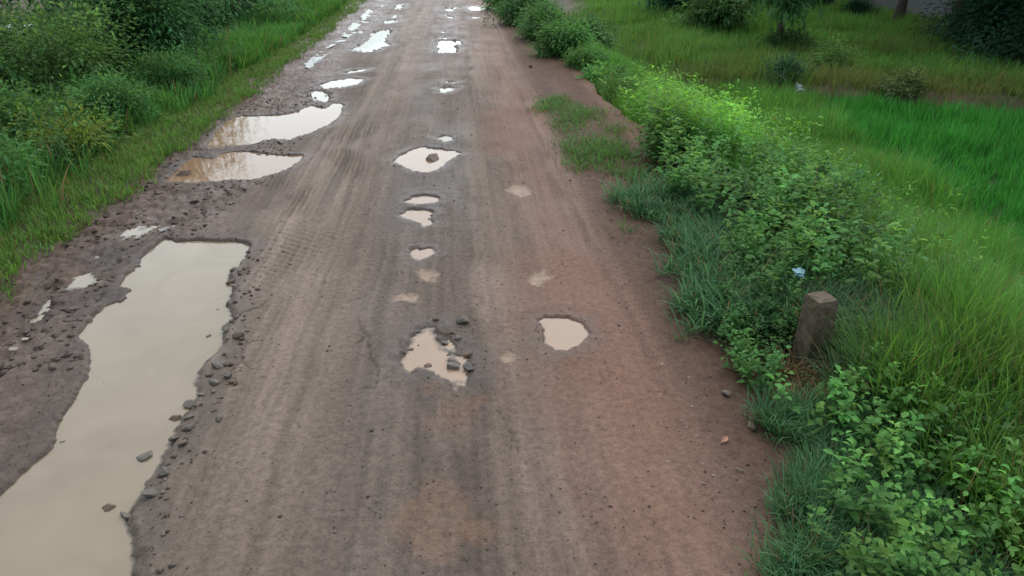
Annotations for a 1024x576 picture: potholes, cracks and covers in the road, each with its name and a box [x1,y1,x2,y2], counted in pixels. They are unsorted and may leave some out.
pothole [202,100,347,149]
pothole [401,244,440,263]
